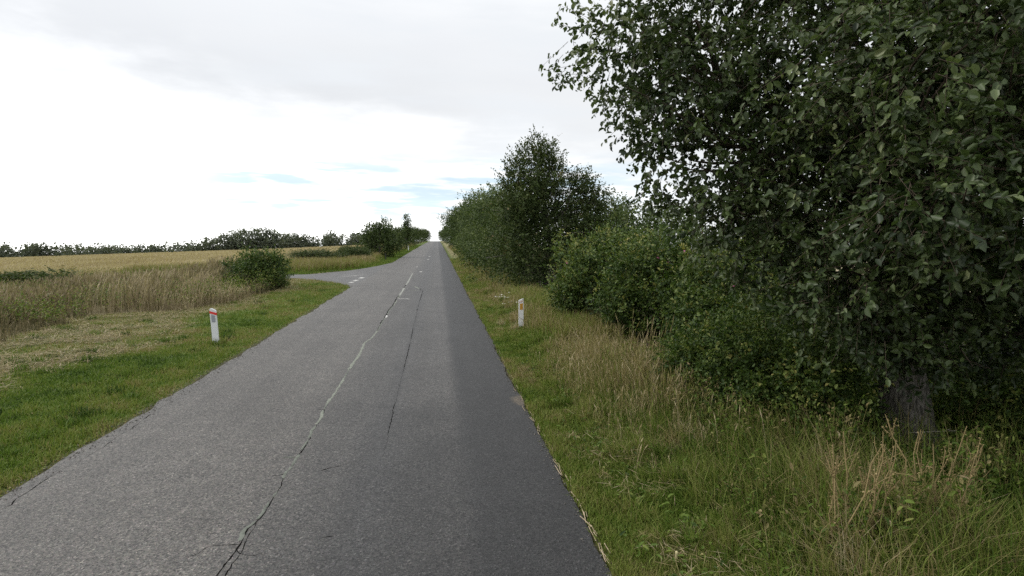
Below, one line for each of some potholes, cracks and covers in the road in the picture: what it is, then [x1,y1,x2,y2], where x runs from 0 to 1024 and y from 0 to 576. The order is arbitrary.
crack [187,273,423,576]
